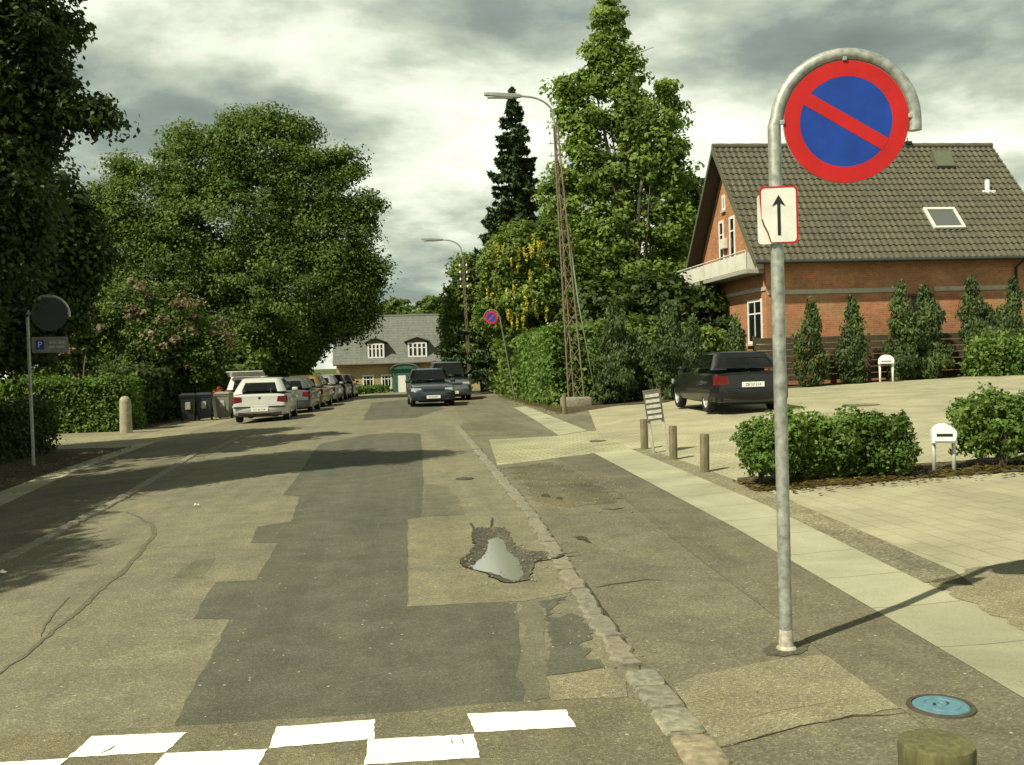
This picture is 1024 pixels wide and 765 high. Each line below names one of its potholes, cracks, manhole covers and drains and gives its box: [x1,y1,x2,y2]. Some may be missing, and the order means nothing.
pothole [460,527,551,583]
crack [0,511,157,673]
crack [720,698,906,747]
manhole cover [906,694,977,719]
